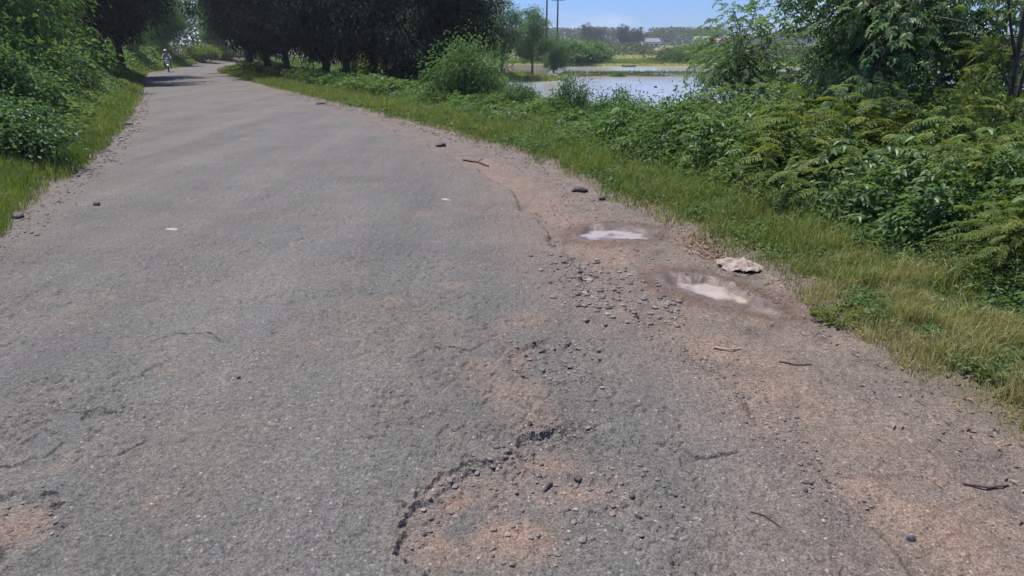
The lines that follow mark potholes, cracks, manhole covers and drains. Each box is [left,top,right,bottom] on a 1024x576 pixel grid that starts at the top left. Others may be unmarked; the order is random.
crack [0,442,66,469]
pothole [646,270,791,320]
crack [117,438,150,456]
crack [152,332,224,343]
crack [60,406,117,421]
crack [681,448,740,461]
pothole [571,223,663,243]
pothole [389,420,693,576]
